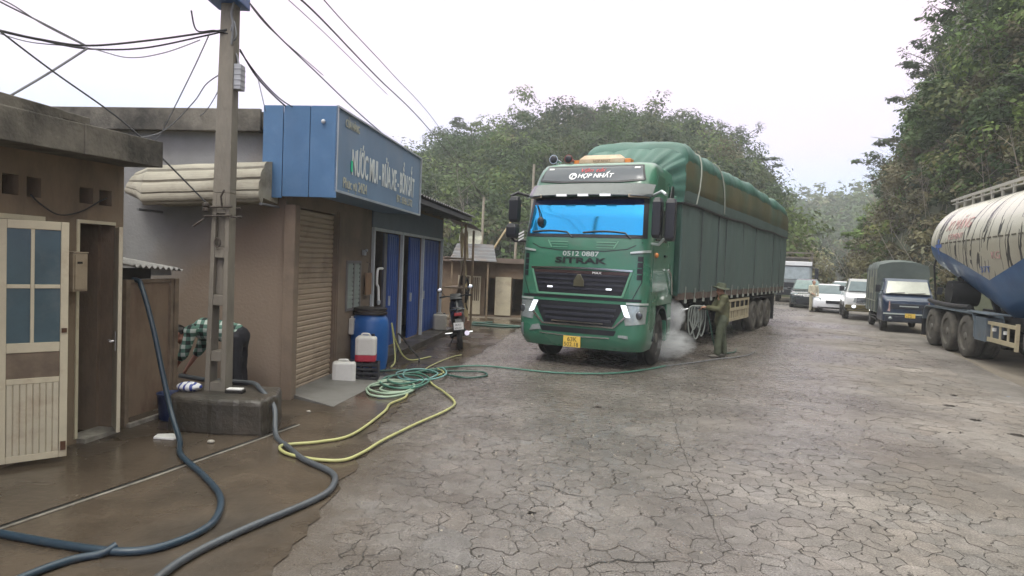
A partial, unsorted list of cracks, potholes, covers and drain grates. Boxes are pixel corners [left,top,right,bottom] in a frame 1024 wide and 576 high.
crack [310,397,987,576]
crack [432,321,1021,541]
